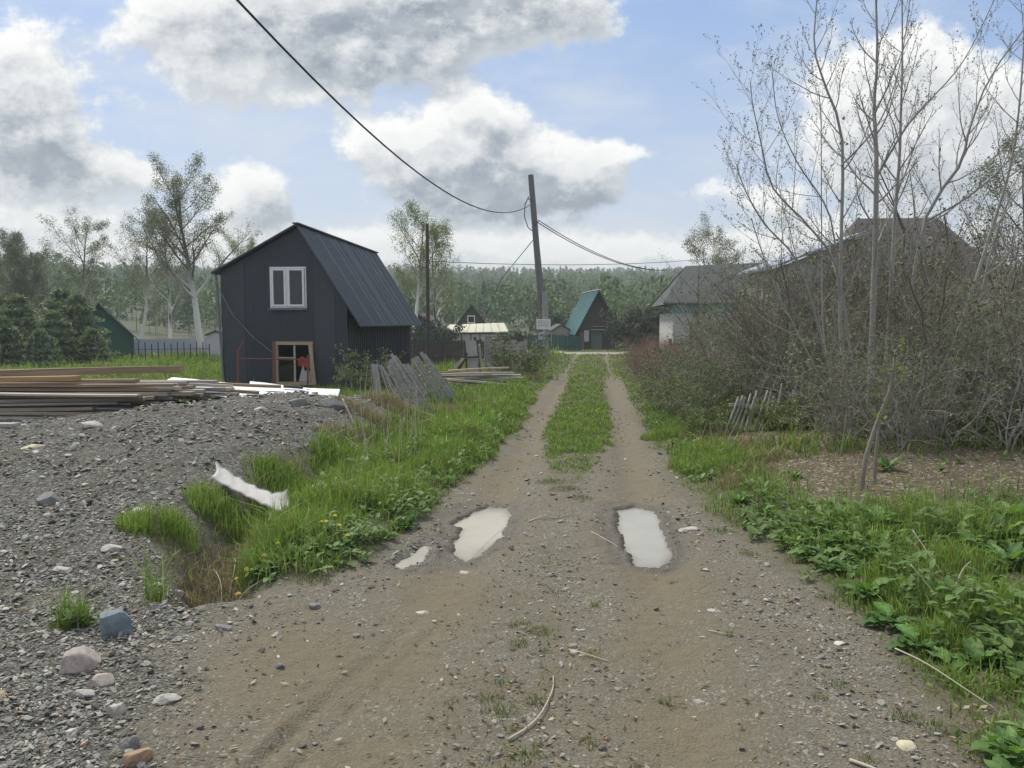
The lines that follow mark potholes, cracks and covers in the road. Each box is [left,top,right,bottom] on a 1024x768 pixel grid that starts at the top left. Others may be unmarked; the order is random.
pothole [384,538,445,573]
pothole [608,503,682,571]
pothole [441,503,518,565]
